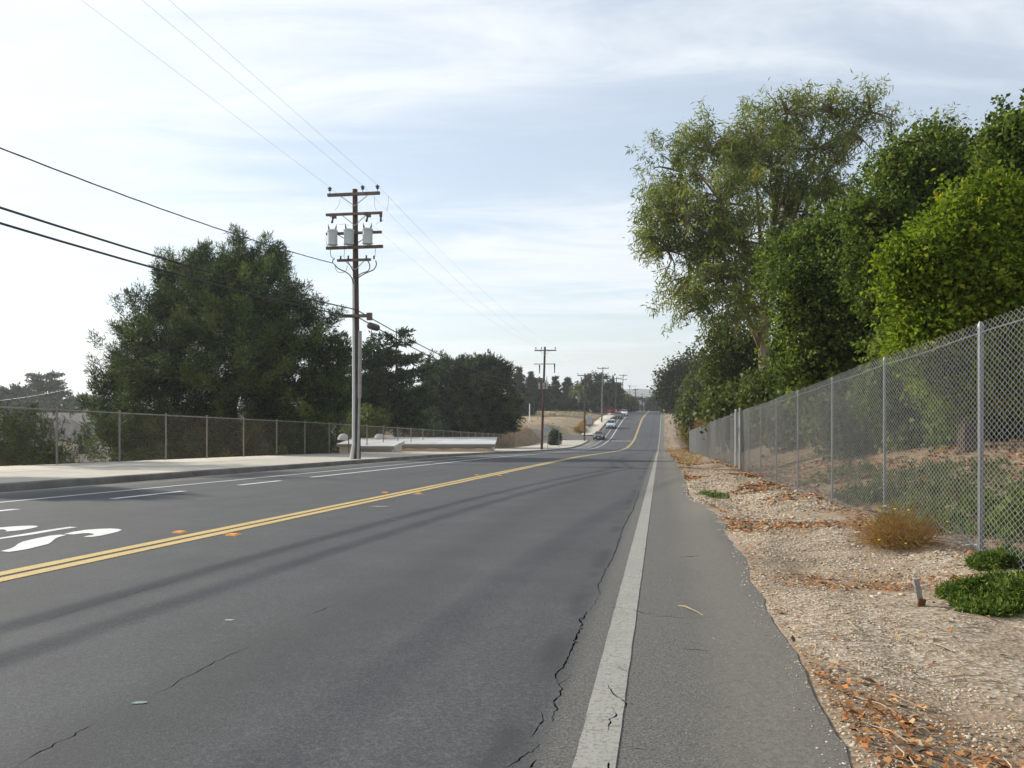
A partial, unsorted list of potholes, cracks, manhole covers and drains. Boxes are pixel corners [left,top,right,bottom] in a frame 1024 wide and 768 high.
crack [508,492,642,768]
